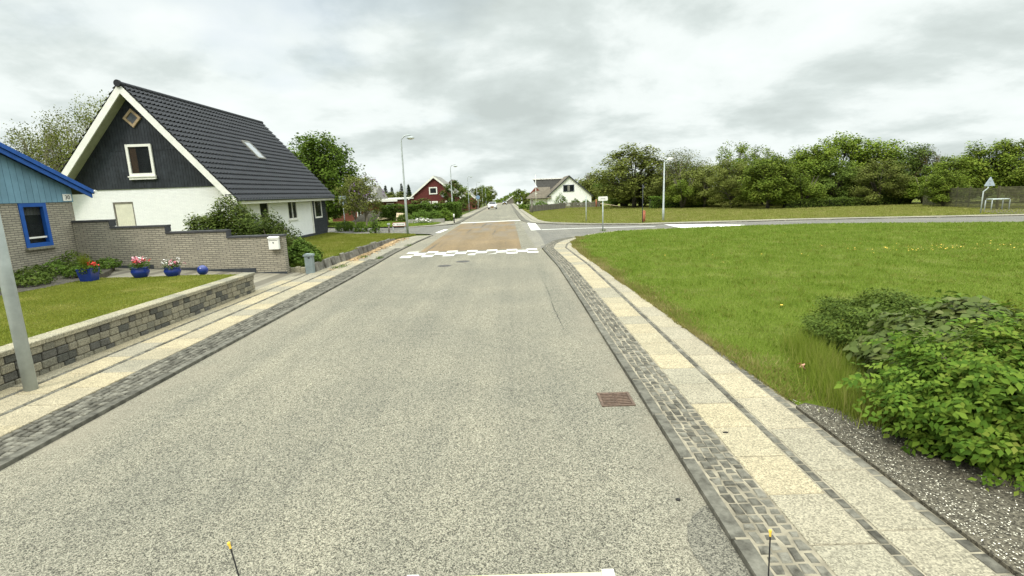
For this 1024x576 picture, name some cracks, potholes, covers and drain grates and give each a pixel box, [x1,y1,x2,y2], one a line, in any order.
drain grate [597,392,636,407]
